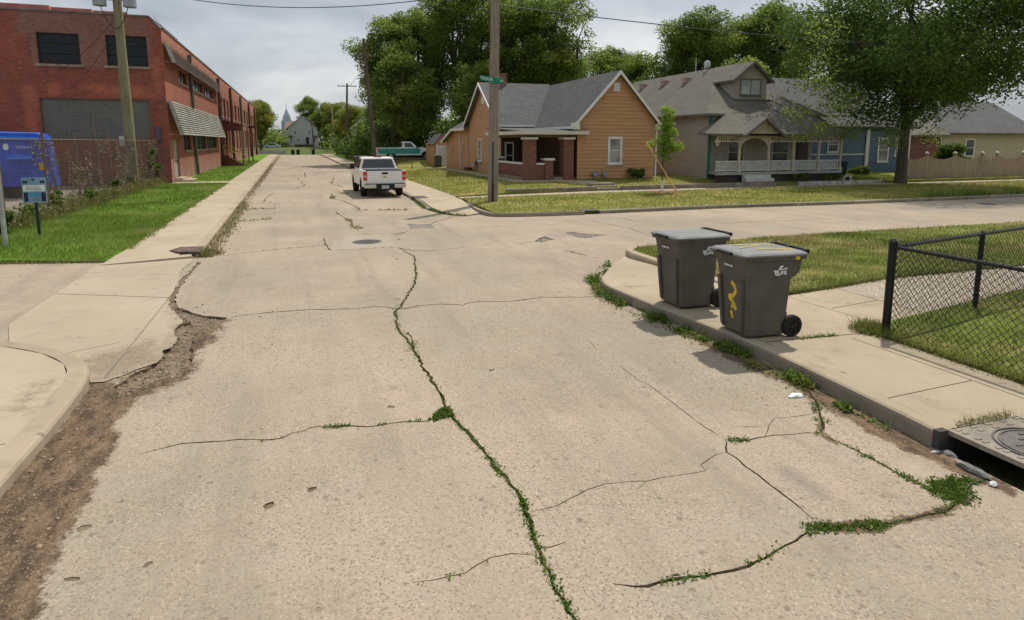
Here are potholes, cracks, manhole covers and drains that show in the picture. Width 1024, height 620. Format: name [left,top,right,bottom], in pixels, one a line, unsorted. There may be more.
pothole [114,308,227,395]
crack [234,247,989,620]
crack [141,420,431,454]
drain grate [169,246,204,257]
pothole [166,262,200,314]
drain grate [931,417,1024,469]
